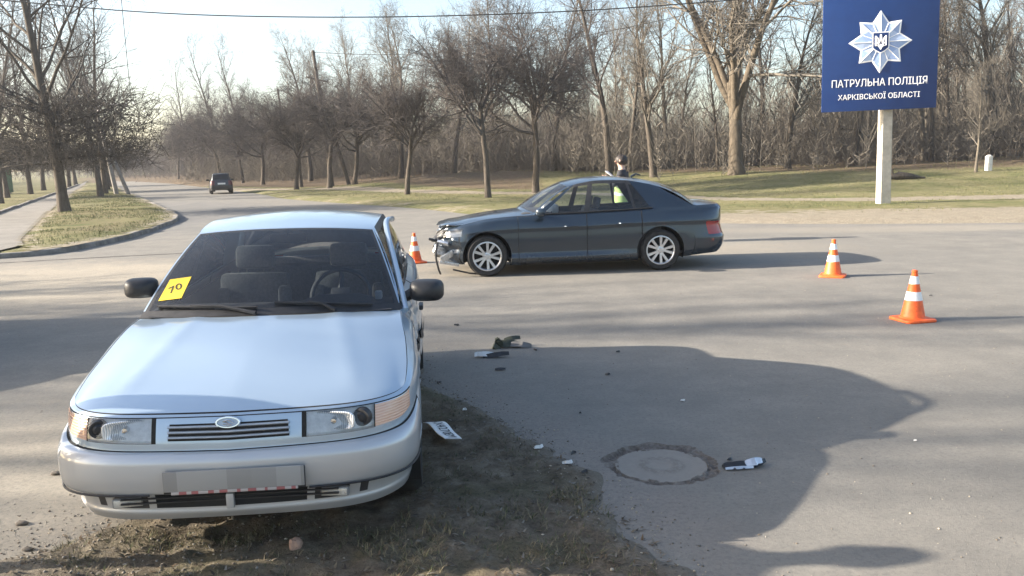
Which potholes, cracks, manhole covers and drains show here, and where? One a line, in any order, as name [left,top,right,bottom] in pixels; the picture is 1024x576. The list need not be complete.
manhole cover [600,442,721,486]
